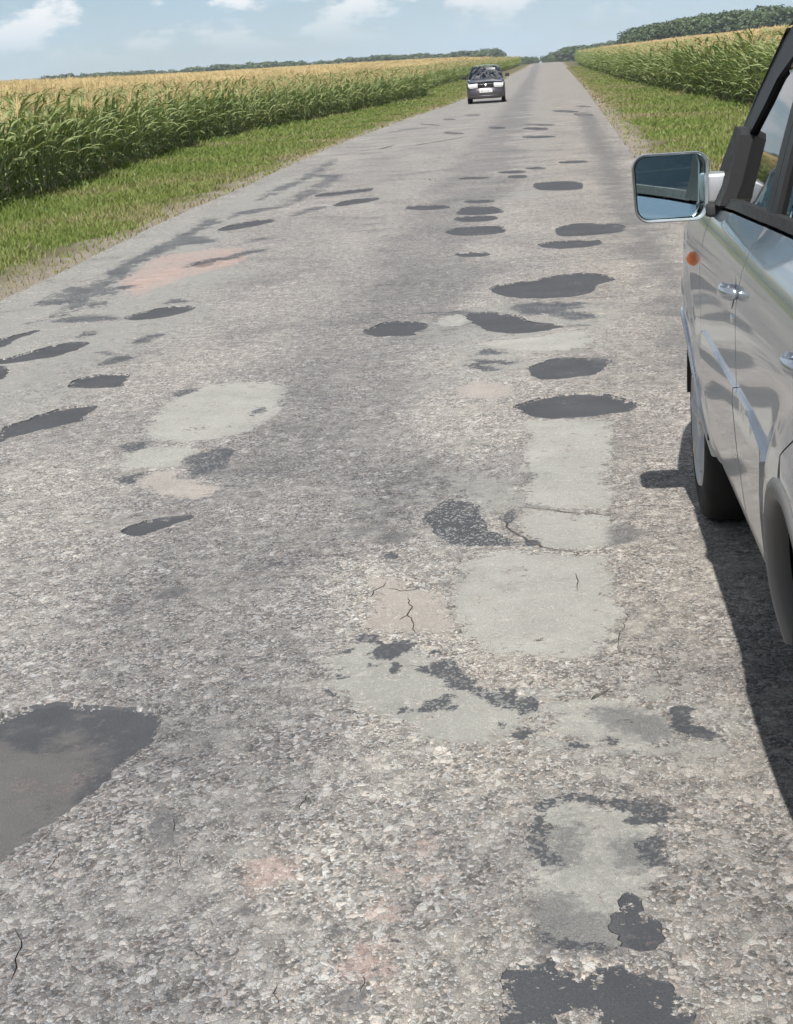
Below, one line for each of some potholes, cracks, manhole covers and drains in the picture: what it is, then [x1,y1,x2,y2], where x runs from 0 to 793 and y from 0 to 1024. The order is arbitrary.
pothole [363,321,428,337]
pothole [608,892,666,952]
pothole [487,273,616,298]
crack [505,506,609,553]
crack [370,582,422,632]
pothole [499,957,700,1024]
crack [11,928,23,981]
pothole [121,515,195,536]
pothole [0,701,162,860]
pothole [0,405,98,442]
pothole [525,357,612,379]
pothole [513,392,641,419]
